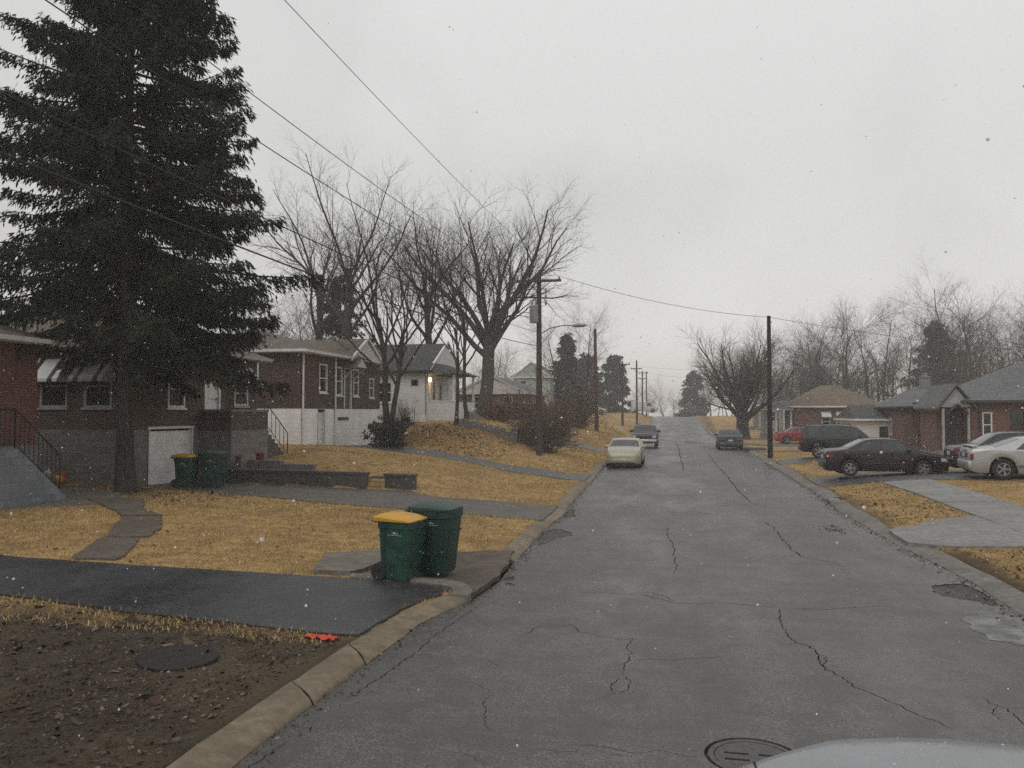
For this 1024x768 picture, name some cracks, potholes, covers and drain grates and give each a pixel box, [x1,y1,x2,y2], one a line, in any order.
manhole cover [704,738,792,768]
crack [529,625,723,698]
pothole [537,529,572,545]
crack [982,697,1024,724]
pothole [931,583,997,606]
crack [580,592,950,728]
manhole cover [136,644,219,672]
crack [692,510,835,564]
crack [344,606,479,701]
